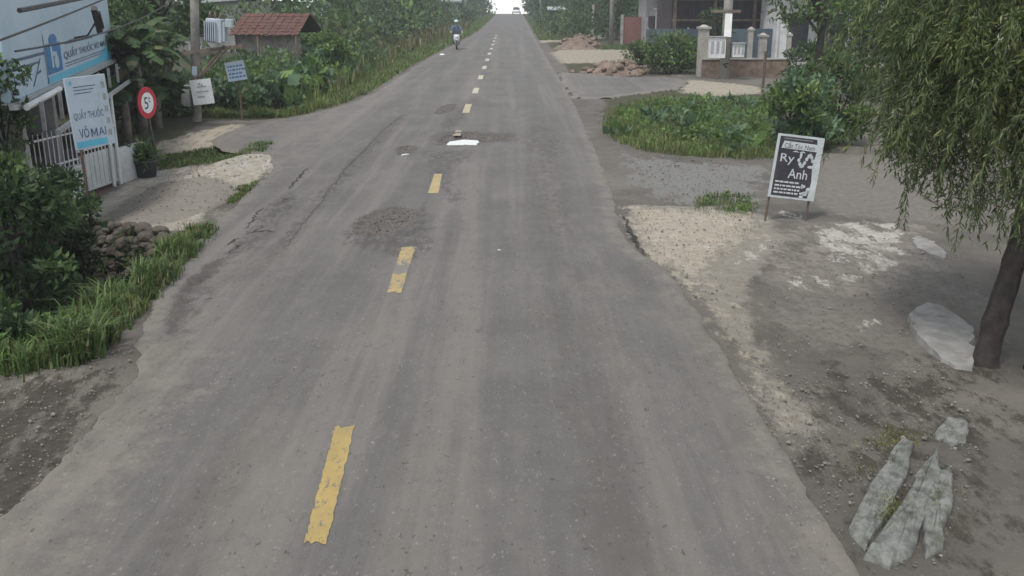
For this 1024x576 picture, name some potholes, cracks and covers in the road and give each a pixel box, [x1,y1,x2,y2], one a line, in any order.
pothole [385,144,427,157]
pothole [426,103,465,117]
crack [199,208,273,253]
pothole [429,131,519,146]
pothole [337,204,432,240]
